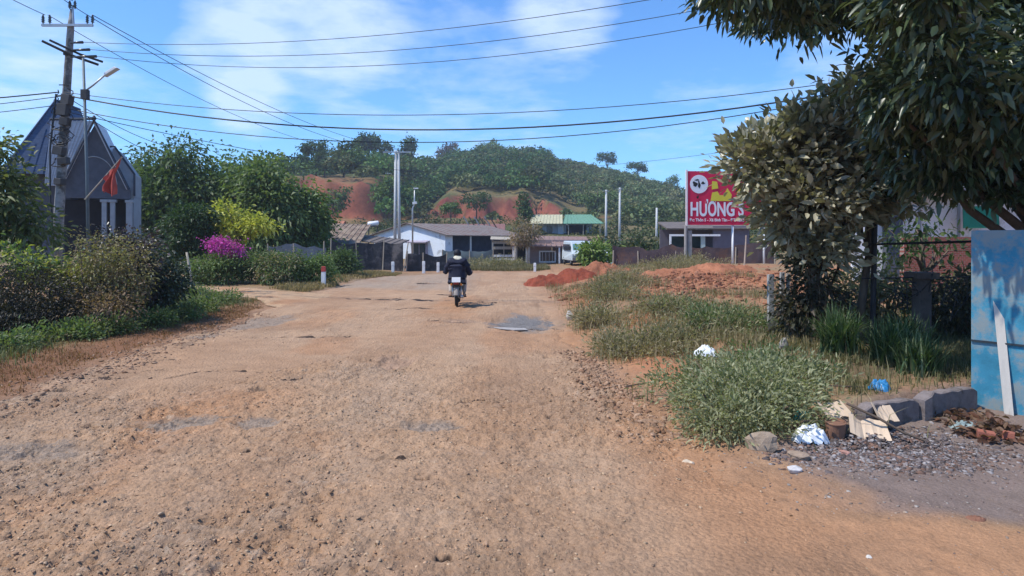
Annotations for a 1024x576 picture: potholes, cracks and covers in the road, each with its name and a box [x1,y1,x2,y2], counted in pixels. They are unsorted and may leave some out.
pothole [476,312,556,334]
